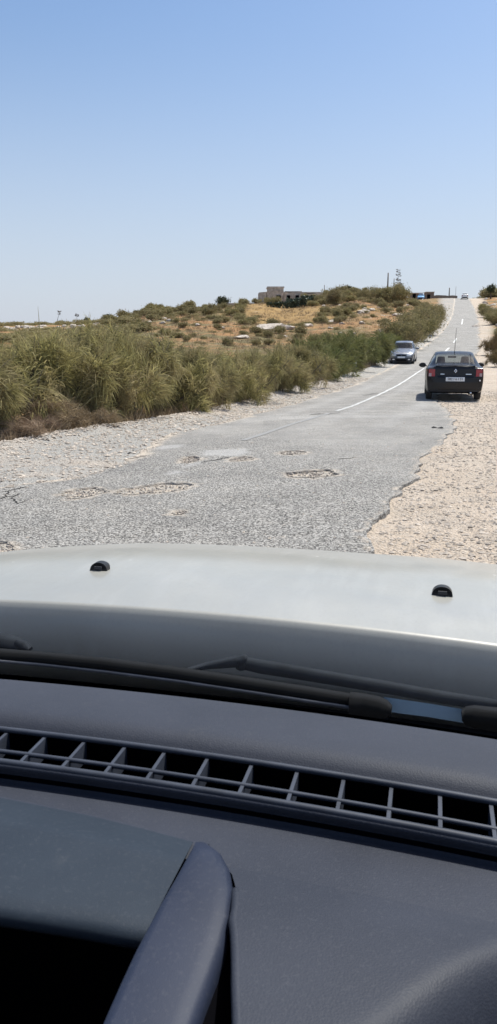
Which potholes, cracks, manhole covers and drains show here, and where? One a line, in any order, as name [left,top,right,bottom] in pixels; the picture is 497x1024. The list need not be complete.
pothole [285,469,338,479]
pothole [61,487,110,499]
pothole [113,482,194,495]
